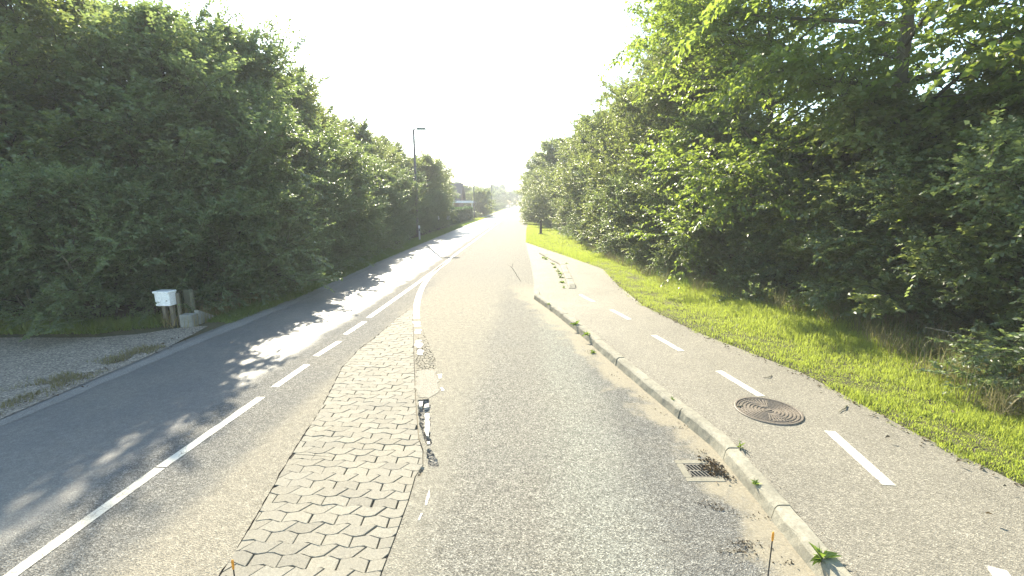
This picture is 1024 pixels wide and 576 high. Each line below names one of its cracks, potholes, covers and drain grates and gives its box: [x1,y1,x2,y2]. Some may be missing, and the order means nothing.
manhole cover [734,397,804,426]
pothole [417,399,432,447]
drain grate [674,460,726,482]
pothole [426,448,439,468]
